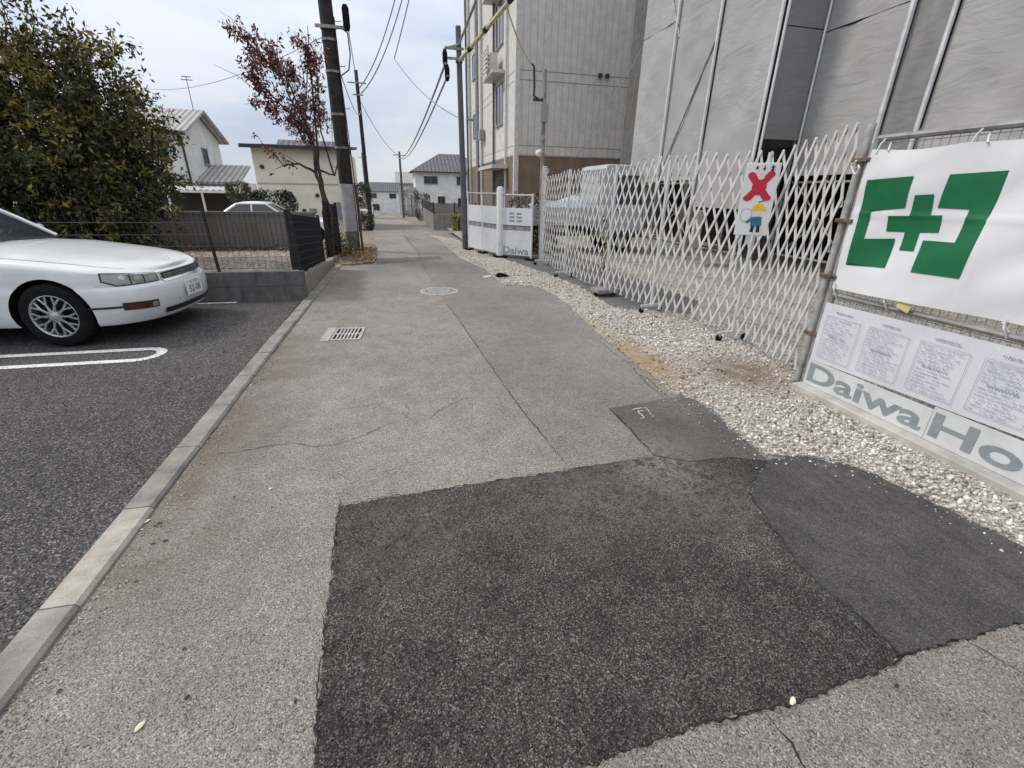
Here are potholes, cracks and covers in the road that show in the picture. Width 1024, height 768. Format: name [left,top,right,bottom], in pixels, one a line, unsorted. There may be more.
crack [765,712,806,768]
manhole cover [420,287,458,295]
crack [194,397,475,461]
drain grate [319,327,366,342]
